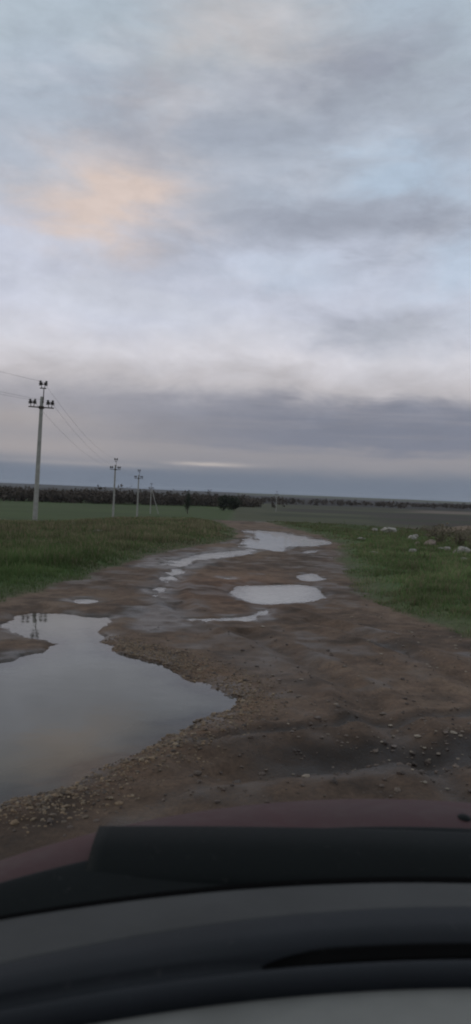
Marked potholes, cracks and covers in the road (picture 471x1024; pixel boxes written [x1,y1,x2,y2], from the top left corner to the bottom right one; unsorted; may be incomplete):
pothole [290,571,333,582]
pothole [152,548,262,567]
pothole [233,529,343,552]
pothole [175,604,282,622]
pothole [224,582,337,605]
pothole [0,608,251,807]
pothole [62,596,107,604]
